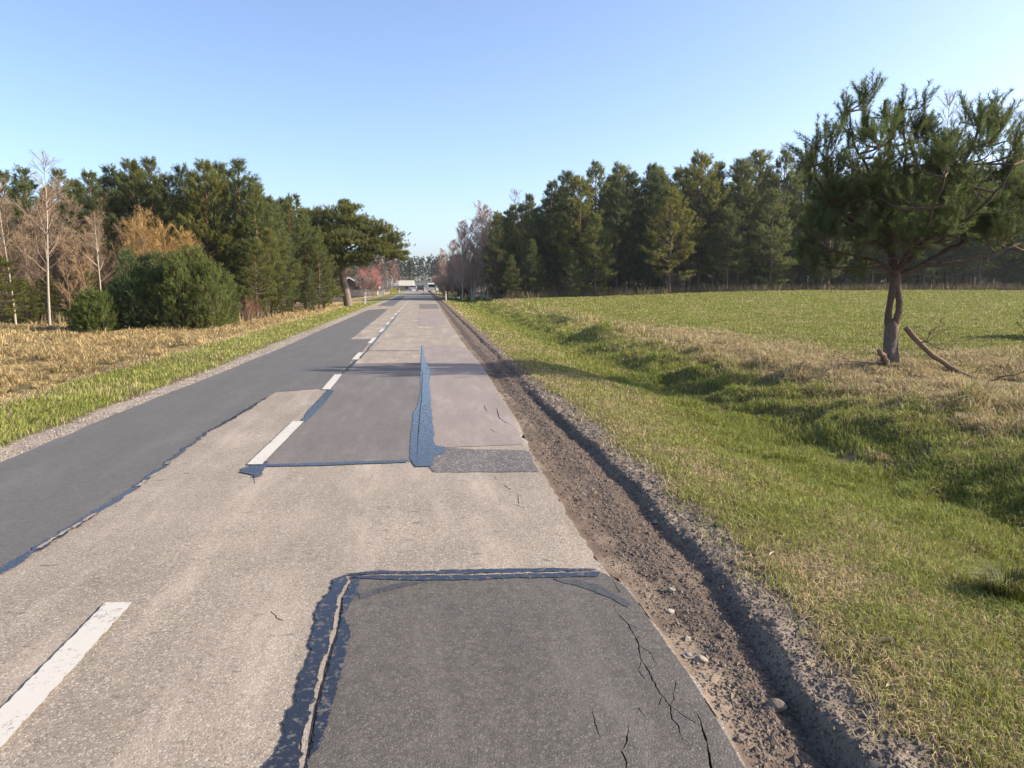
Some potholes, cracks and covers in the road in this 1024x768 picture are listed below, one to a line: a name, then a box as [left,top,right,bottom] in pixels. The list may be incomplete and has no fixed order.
crack [615,611,713,768]
